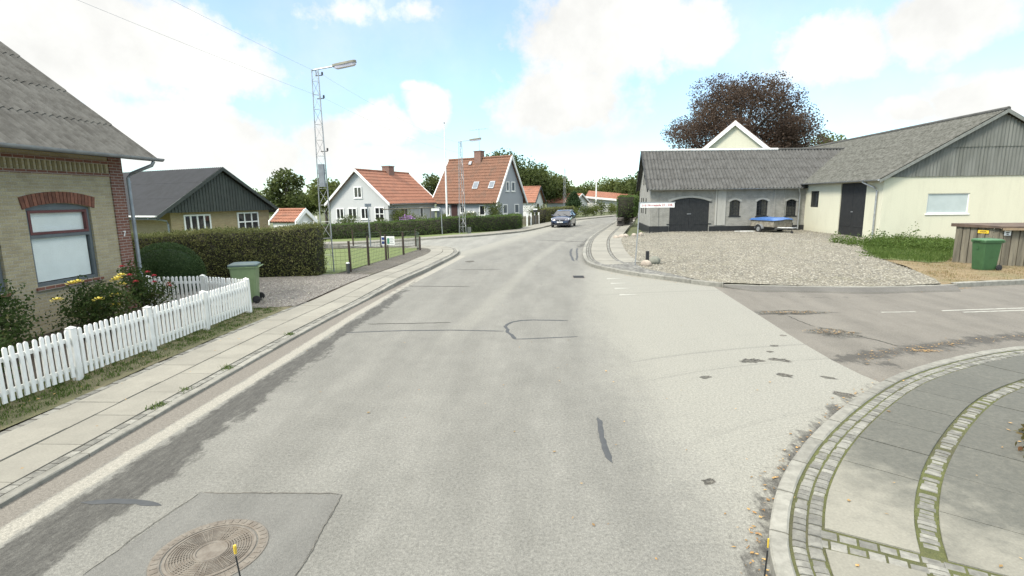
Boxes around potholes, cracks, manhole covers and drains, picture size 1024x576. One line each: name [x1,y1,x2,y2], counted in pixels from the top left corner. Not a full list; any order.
manhole cover [147,519,269,576]
